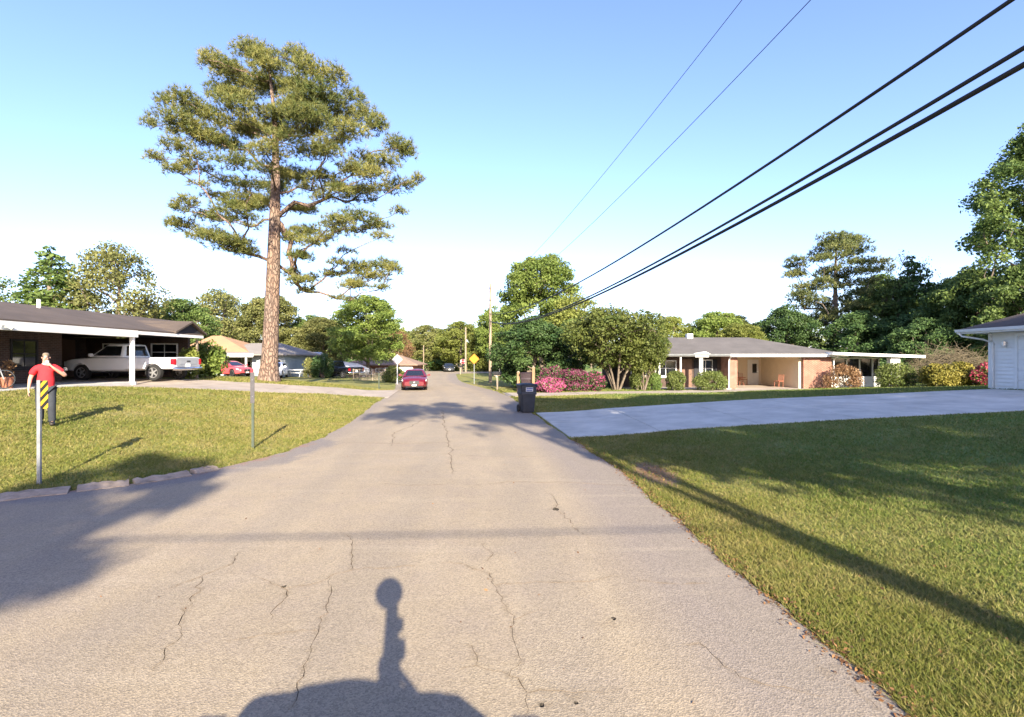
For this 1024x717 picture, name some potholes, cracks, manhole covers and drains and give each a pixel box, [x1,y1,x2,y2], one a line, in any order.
crack [158,554,238,664]
crack [236,535,413,708]
crack [449,543,604,714]
